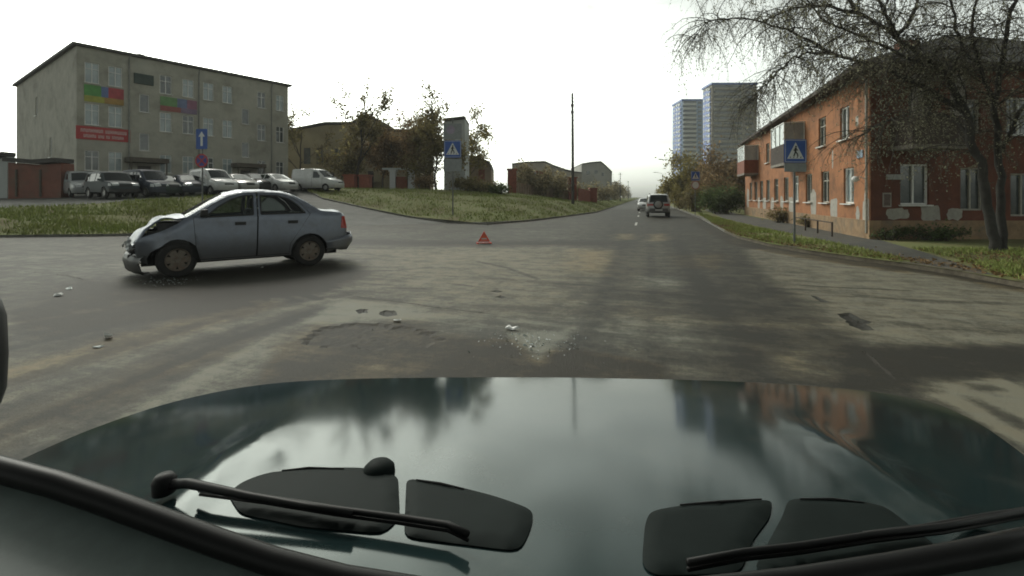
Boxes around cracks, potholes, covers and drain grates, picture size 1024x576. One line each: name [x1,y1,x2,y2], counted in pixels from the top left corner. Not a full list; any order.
crack [861,350,898,381]
pothole [298,323,447,351]
pothole [838,313,874,331]
